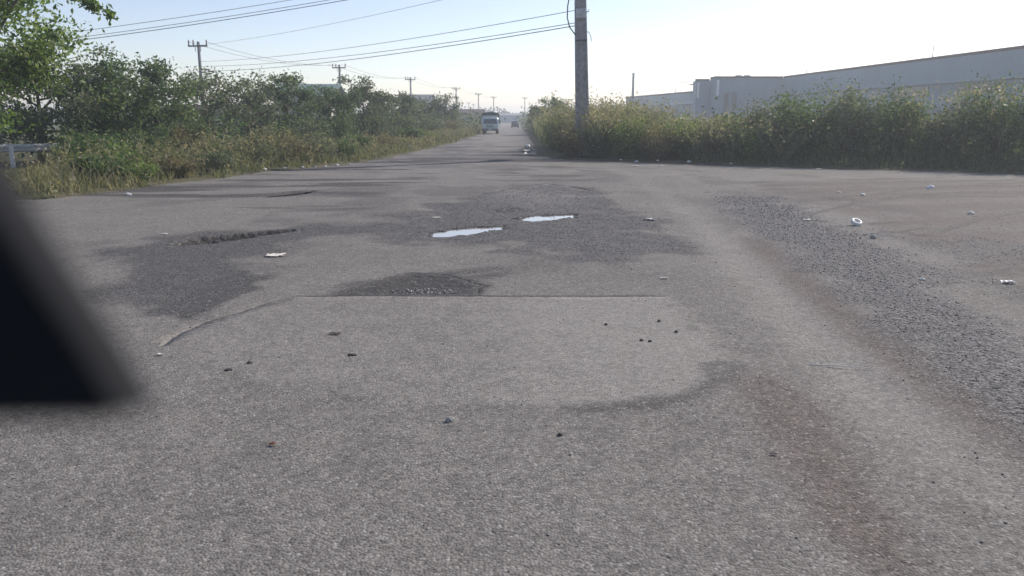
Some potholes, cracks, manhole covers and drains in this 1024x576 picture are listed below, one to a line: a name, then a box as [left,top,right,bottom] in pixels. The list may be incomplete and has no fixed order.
pothole [426,225,510,238]
pothole [163,228,302,247]
pothole [509,213,584,223]
pothole [339,273,485,296]
